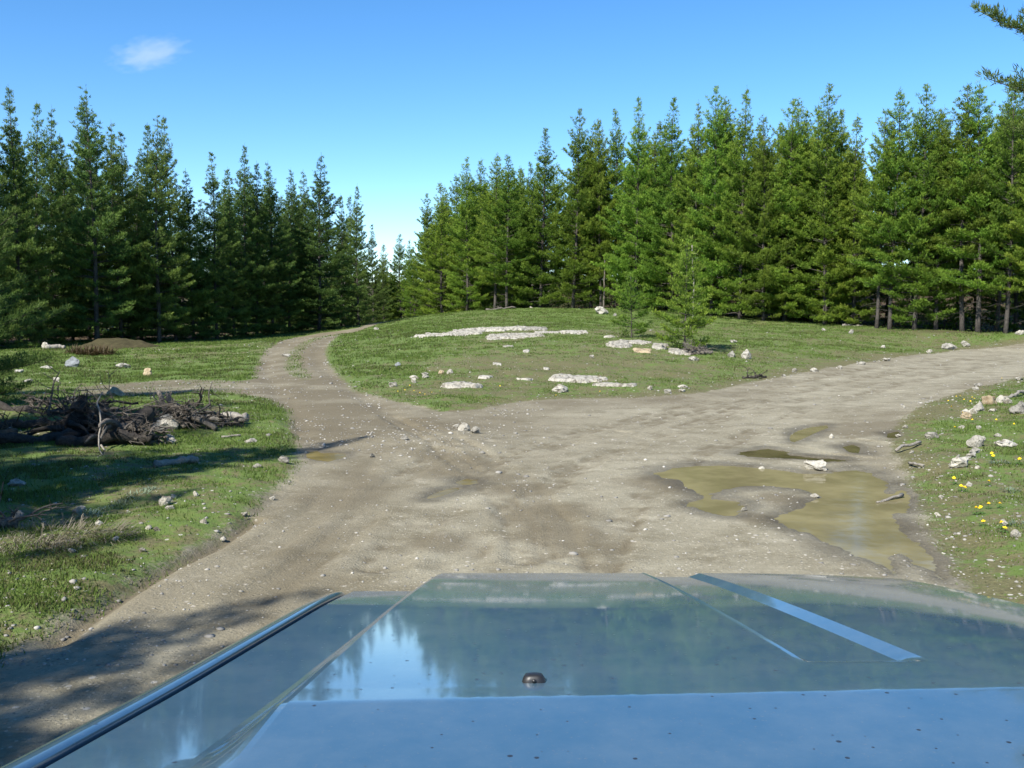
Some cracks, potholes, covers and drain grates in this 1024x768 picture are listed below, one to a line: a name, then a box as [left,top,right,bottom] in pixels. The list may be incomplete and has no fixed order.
pothole [839,444,864,453]
pothole [785,424,831,442]
pothole [730,447,853,462]
pothole [421,486,464,500]
pothole [301,450,349,462]
pothole [647,463,960,586]
pothole [453,478,483,486]
